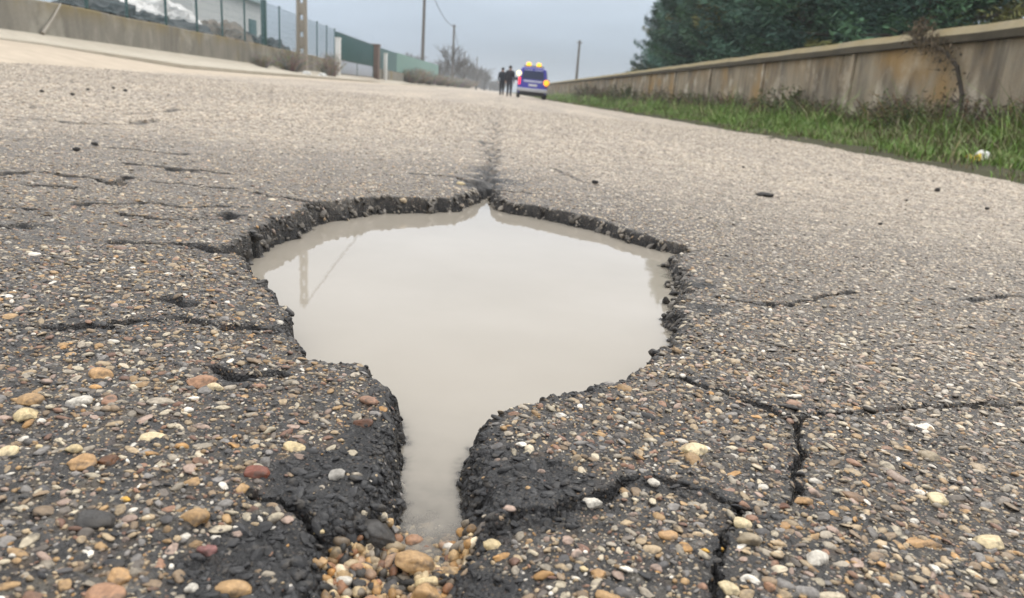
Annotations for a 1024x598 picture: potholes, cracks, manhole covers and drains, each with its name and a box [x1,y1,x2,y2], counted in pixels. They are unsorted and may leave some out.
crack [959,294,1023,302]
crack [202,363,290,382]
pothole [218,186,696,598]
crack [0,295,275,332]
crack [503,474,753,598]
crack [0,147,315,221]
crack [713,290,858,308]
crack [668,376,1019,506]
crack [0,207,48,230]
crack [107,239,223,254]
